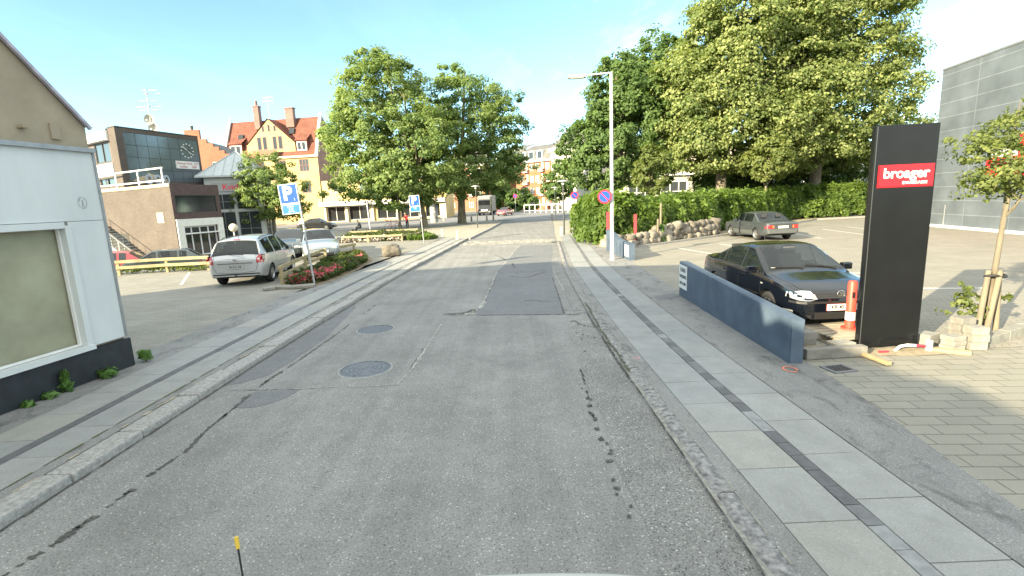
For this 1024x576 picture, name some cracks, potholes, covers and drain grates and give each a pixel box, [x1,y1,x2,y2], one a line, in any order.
crack [231,324,442,391]
crack [574,304,632,382]
manhole cover [338,360,393,379]
drain grate [819,364,858,374]
manhole cover [356,325,395,335]
